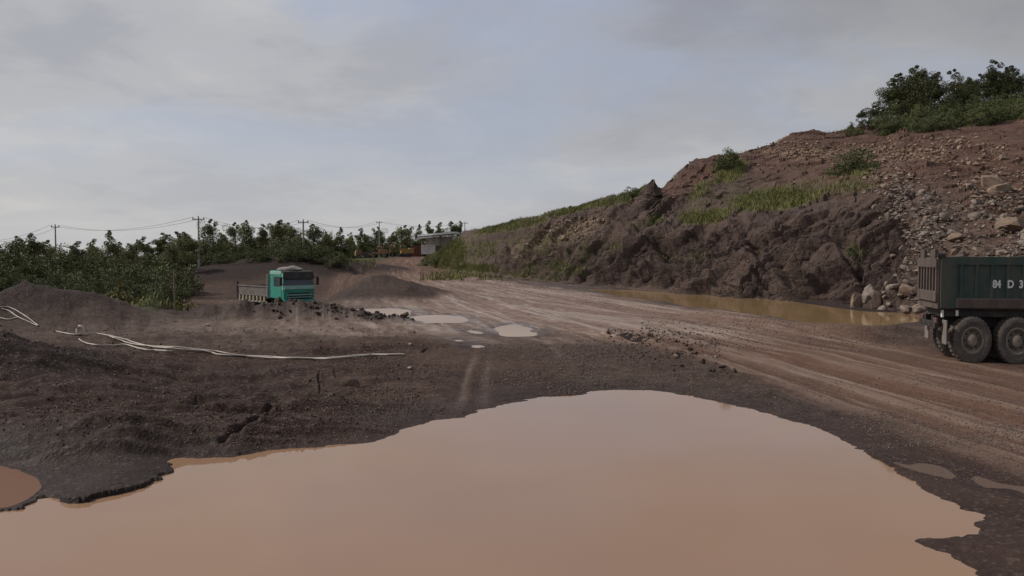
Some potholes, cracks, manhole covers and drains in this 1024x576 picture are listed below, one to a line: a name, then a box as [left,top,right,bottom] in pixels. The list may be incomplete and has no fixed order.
pothole [410,315,469,323]
pothole [356,308,411,316]
pothole [494,325,538,337]
